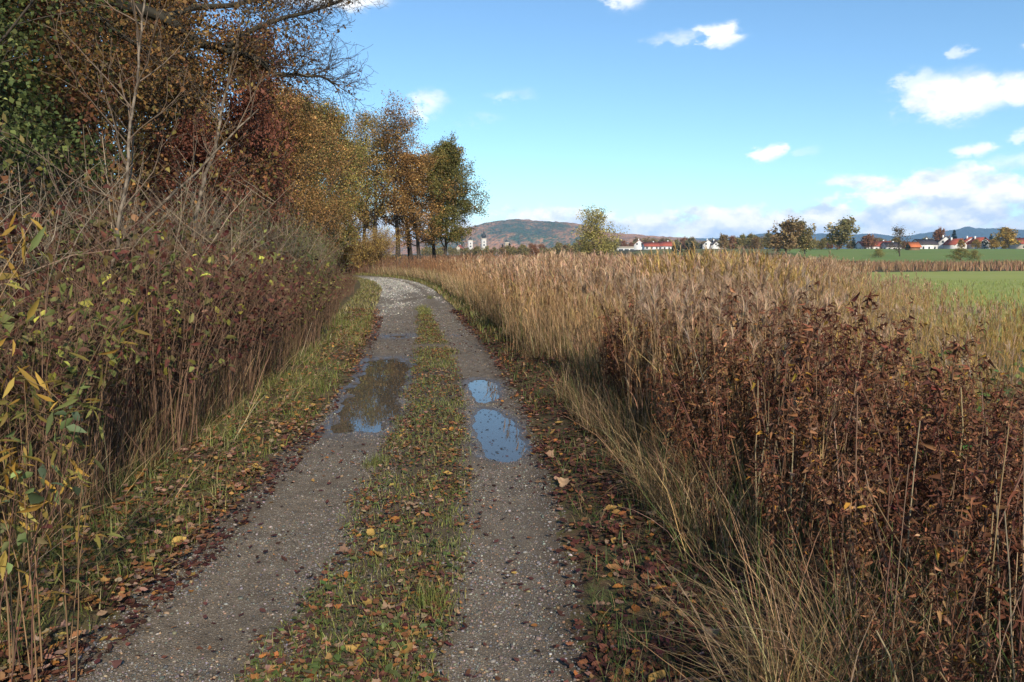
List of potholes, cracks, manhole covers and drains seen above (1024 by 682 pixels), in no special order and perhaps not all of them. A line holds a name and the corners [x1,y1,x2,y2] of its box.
pothole [324,358,417,434]
pothole [468,406,533,463]
pothole [464,378,503,403]
